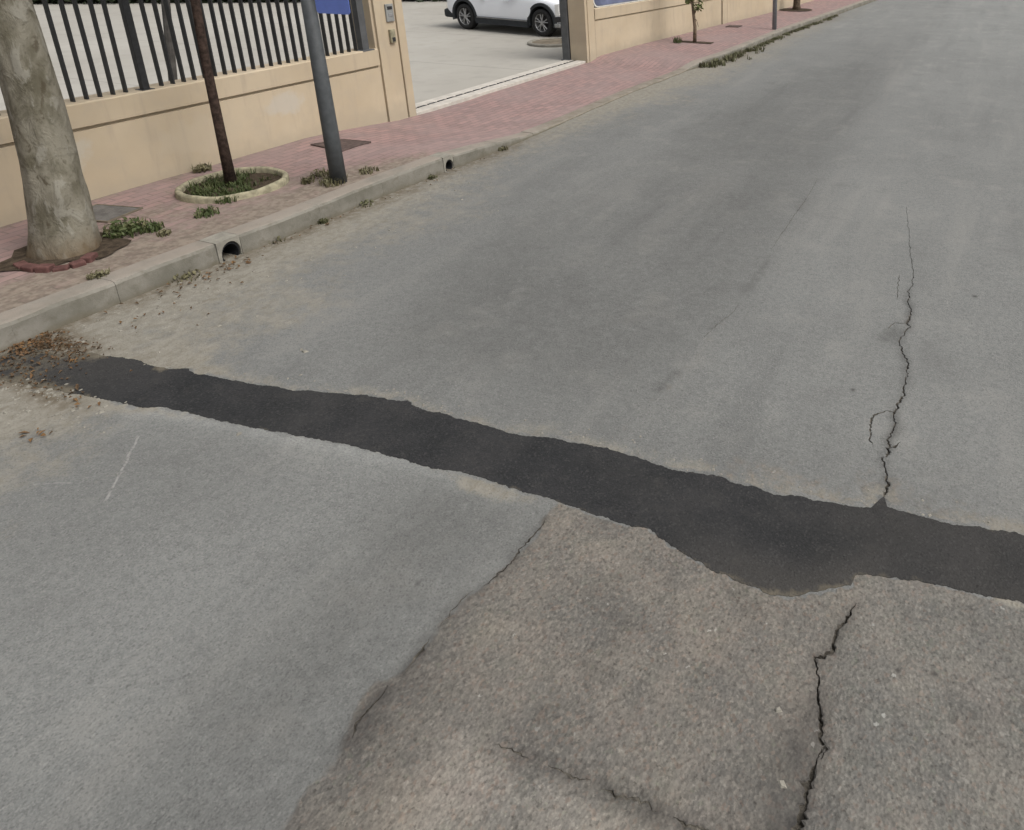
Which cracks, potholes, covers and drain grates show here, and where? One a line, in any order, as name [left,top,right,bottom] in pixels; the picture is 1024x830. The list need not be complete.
crack [495,744,711,830]
manhole cover [92,204,143,223]
crack [352,518,546,738]
crack [868,212,914,497]
manhole cover [310,139,371,152]
crack [788,603,857,830]
crack [702,182,816,340]
